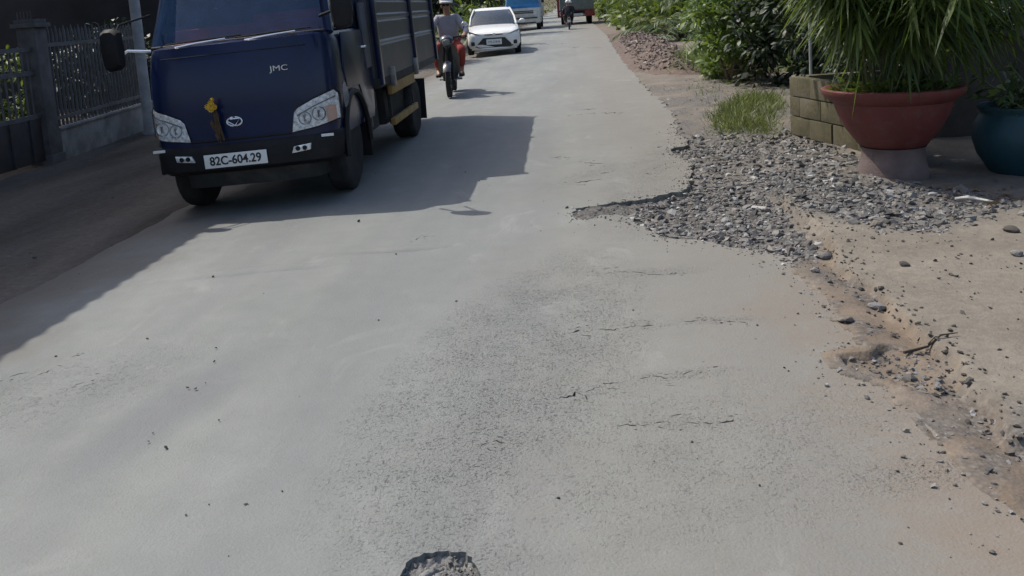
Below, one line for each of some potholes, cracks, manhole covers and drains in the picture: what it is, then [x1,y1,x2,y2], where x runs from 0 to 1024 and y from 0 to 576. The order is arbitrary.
crack [572,320,652,338]
crack [620,414,738,431]
crack [559,382,618,402]
pothole [402,554,478,576]
